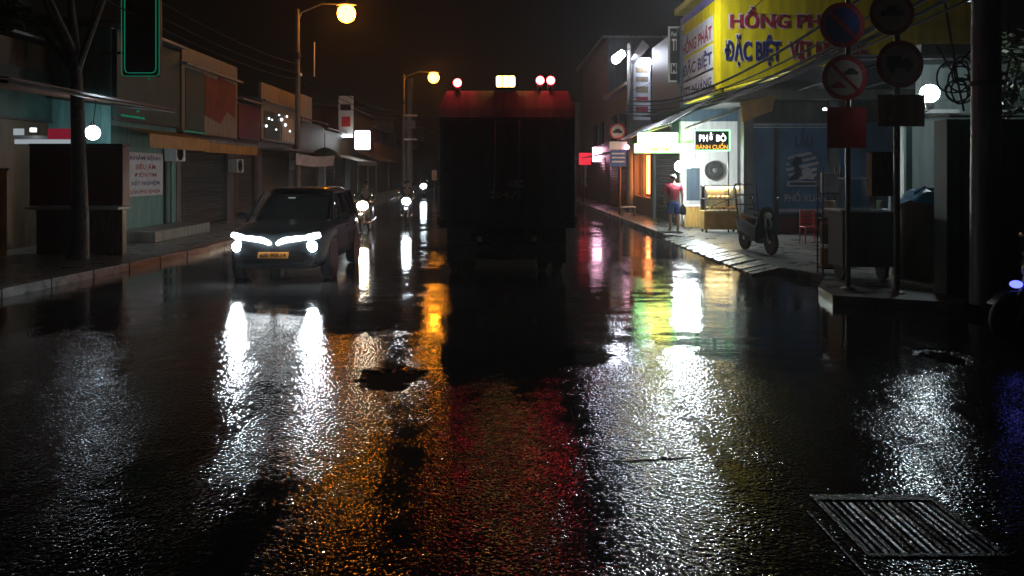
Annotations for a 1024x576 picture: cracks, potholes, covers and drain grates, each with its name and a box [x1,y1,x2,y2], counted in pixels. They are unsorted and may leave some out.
pothole [907,346,975,366]
drain grate [806,494,1012,576]
pothole [347,364,434,395]
